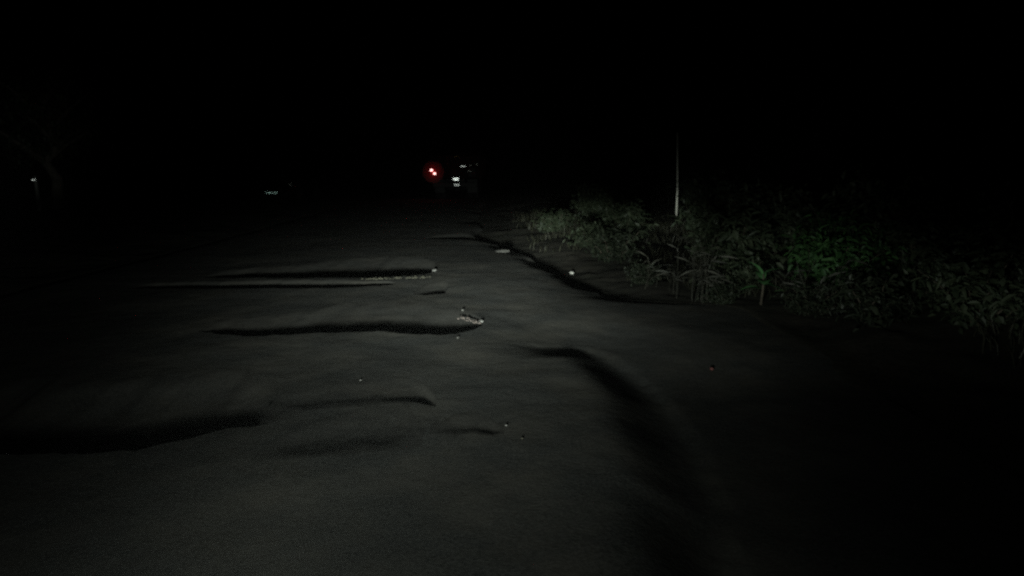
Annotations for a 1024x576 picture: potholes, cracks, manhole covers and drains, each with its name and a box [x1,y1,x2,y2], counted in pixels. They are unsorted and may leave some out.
pothole [0,369,285,455]
pothole [264,376,438,411]
pothole [128,279,395,289]
pothole [197,300,482,336]
pothole [202,255,438,278]
pothole [248,405,426,462]
